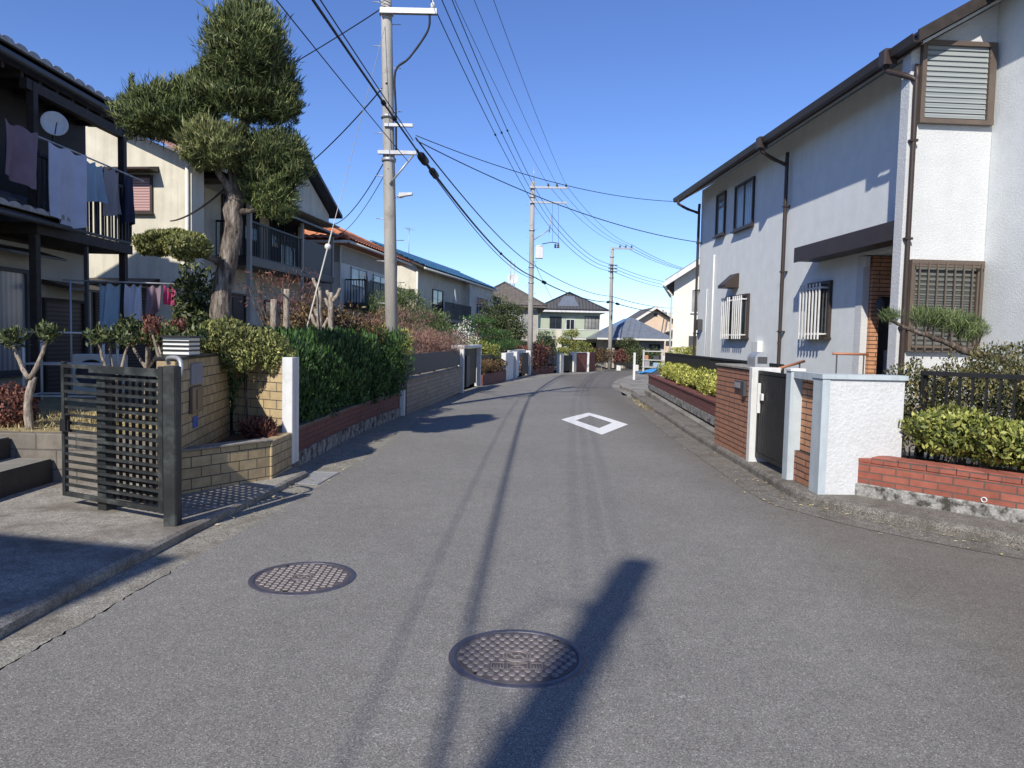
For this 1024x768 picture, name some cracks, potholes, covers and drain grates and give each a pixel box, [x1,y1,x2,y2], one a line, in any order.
crack [0,571,171,670]
manhole cover [448,629,586,689]
manhole cover [248,562,356,596]
